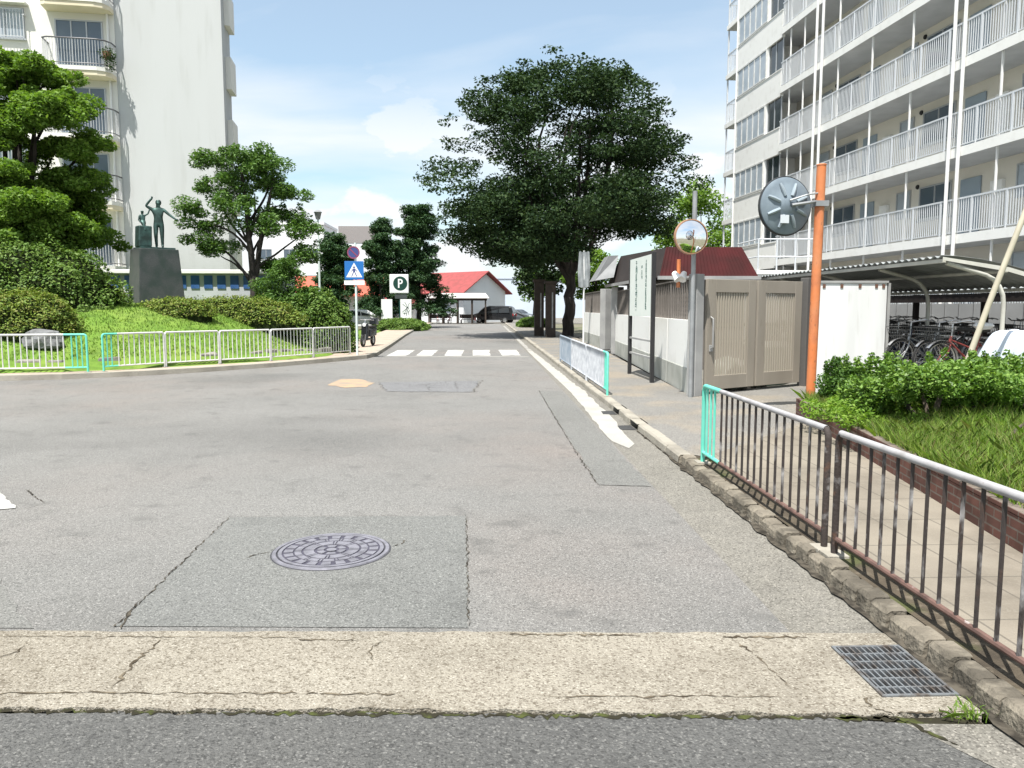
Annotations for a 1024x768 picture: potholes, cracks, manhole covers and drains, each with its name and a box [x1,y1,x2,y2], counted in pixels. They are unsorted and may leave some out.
crack [0,430,1024,745]
drain grate [831,645,960,697]
manhole cover [270,533,391,571]
